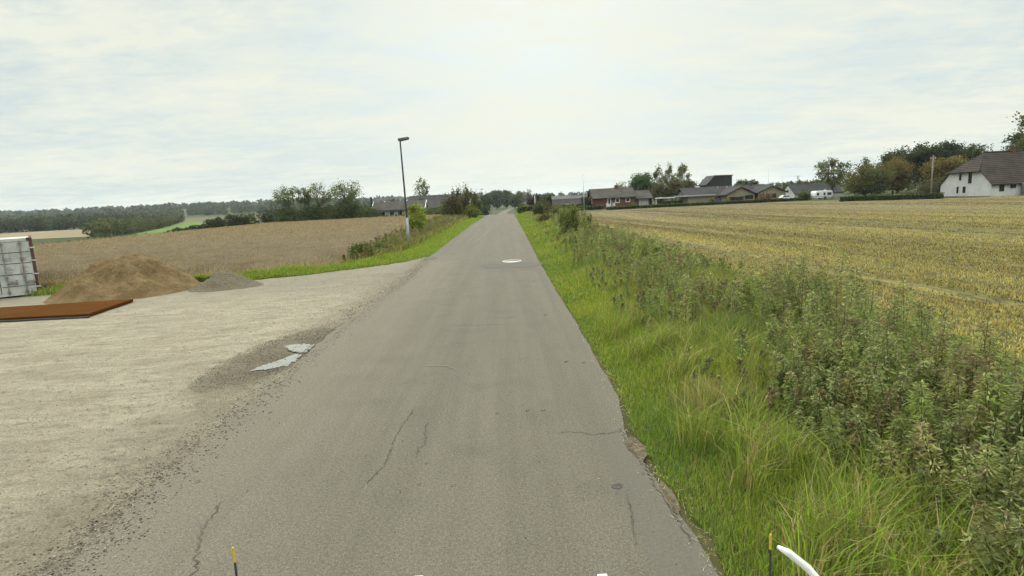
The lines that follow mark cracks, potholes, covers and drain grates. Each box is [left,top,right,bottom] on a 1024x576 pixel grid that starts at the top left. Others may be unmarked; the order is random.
crack [559,430,692,543]
crack [188,503,220,576]
crack [367,409,428,482]
